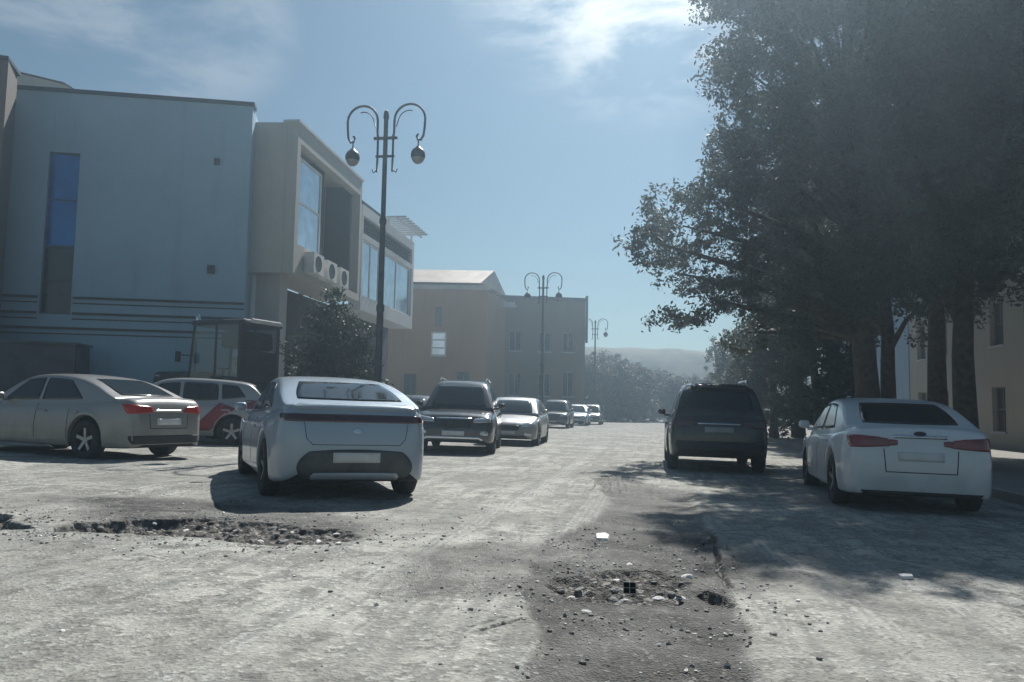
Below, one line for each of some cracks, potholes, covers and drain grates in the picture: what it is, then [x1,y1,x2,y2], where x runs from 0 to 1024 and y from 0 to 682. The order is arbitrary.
pothole [676,588,748,613]
pothole [532,567,708,610]
pothole [0,513,44,532]
pothole [31,518,372,548]
